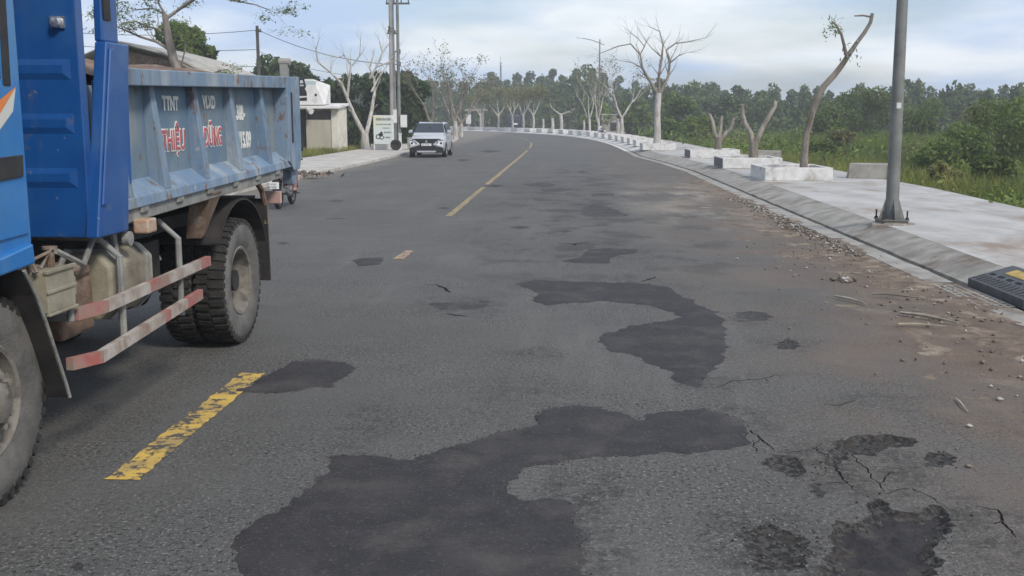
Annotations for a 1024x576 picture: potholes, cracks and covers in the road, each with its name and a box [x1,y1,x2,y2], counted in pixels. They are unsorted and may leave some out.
pothole [736,522,814,572]
pothole [824,434,918,466]
pothole [924,450,957,468]
pothole [761,455,807,477]
crack [976,506,1014,535]
drain grate [934,285,1015,308]
pothole [818,499,957,576]
crack [751,431,935,500]
